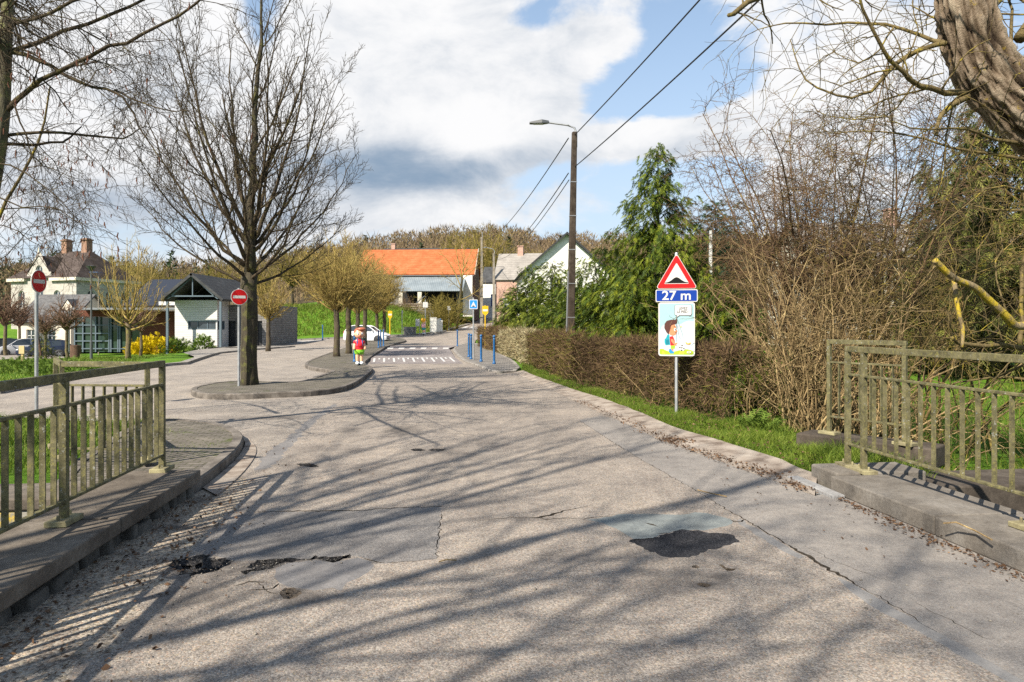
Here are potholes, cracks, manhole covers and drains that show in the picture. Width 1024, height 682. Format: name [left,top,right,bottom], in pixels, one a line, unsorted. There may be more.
crack [234,581,279,594]
crack [268,506,443,563]
pothole [241,554,351,574]
pothole [629,529,739,558]
crack [487,505,605,520]
pothole [168,554,231,576]
